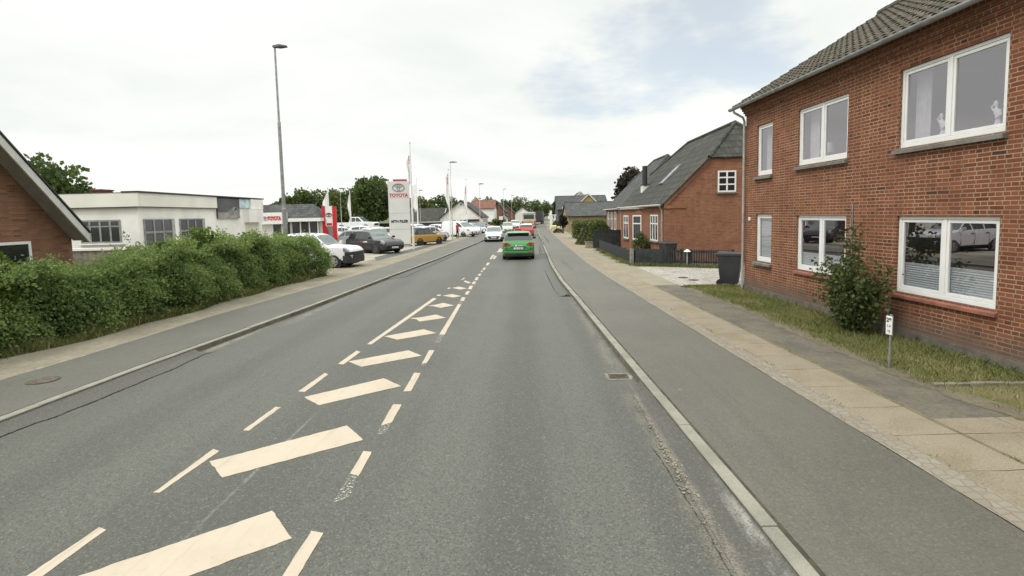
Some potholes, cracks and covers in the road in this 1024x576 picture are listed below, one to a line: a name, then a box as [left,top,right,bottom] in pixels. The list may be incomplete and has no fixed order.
crack [0,351,216,437]
manhole cover [24,376,61,385]
